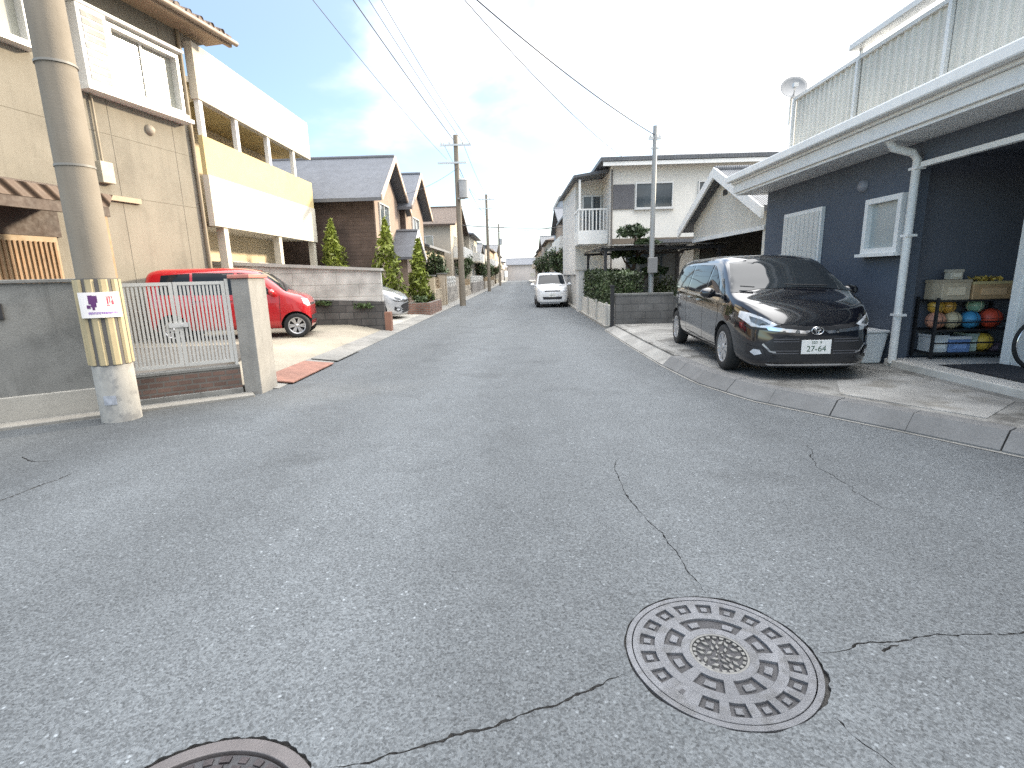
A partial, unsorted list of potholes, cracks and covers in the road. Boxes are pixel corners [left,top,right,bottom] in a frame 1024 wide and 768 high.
manhole cover [624,596,831,733]
crack [820,631,1024,653]
crack [334,674,627,767]
crack [832,717,896,768]
crack [614,460,706,593]
crack [0,457,70,501]
manhole cover [144,736,312,768]
